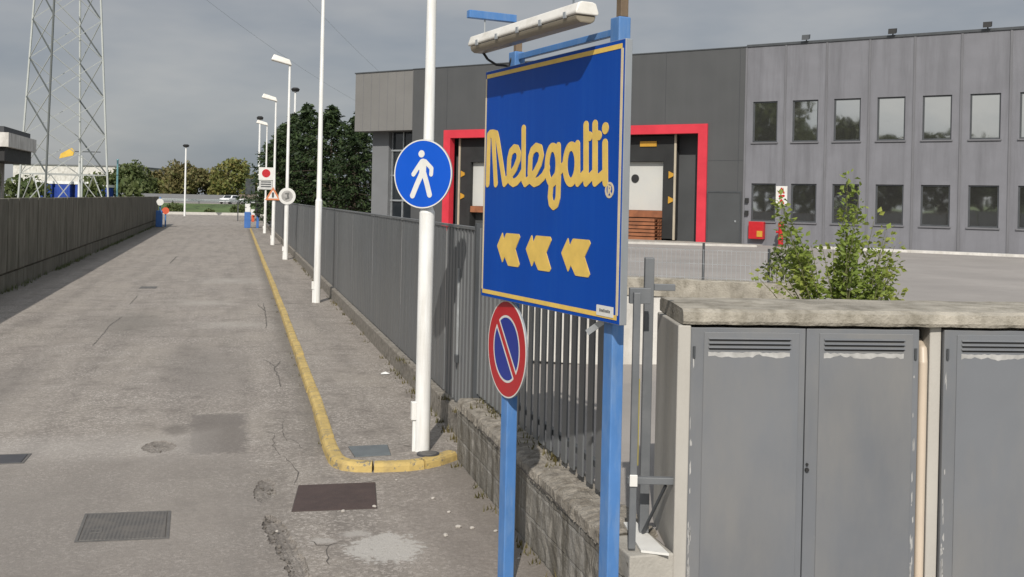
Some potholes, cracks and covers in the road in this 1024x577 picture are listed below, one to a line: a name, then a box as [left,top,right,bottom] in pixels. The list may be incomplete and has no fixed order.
pothole [141,441,177,453]
manhole cover [348,444,391,458]
manhole cover [291,482,378,512]
pothole [262,515,312,577]
pothole [253,479,277,503]
crack [271,418,302,484]
